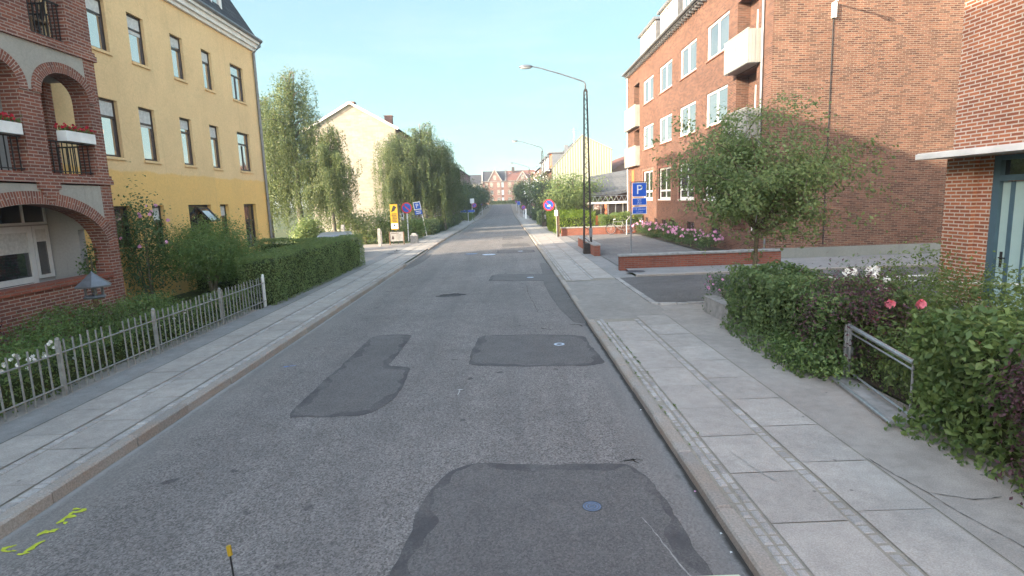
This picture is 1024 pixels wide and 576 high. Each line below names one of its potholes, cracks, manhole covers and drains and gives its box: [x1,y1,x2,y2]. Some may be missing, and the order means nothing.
utility cover [581,501,602,512]
